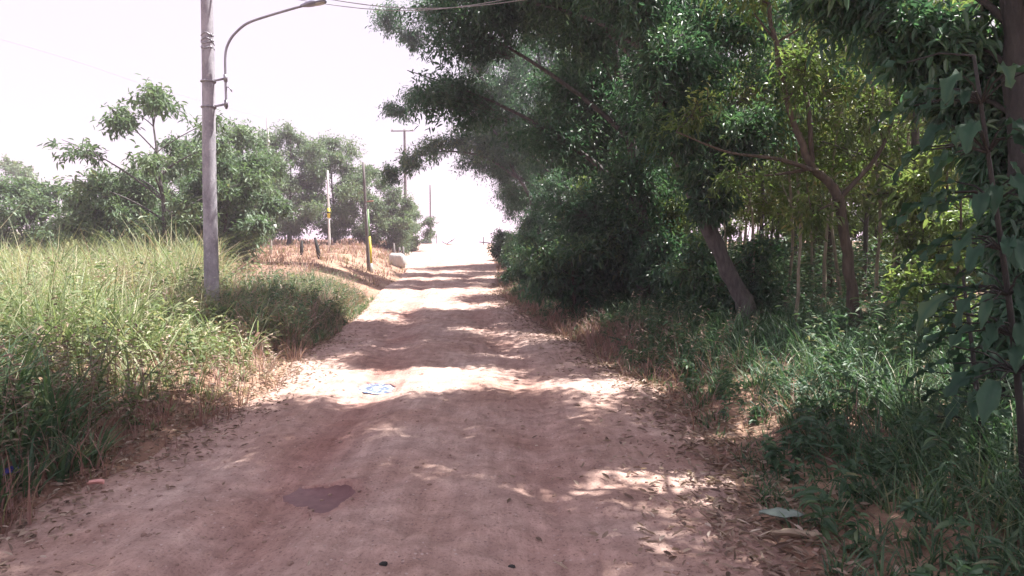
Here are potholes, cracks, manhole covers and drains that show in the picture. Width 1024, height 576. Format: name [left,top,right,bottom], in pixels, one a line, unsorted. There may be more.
pothole [275,479,365,517]
